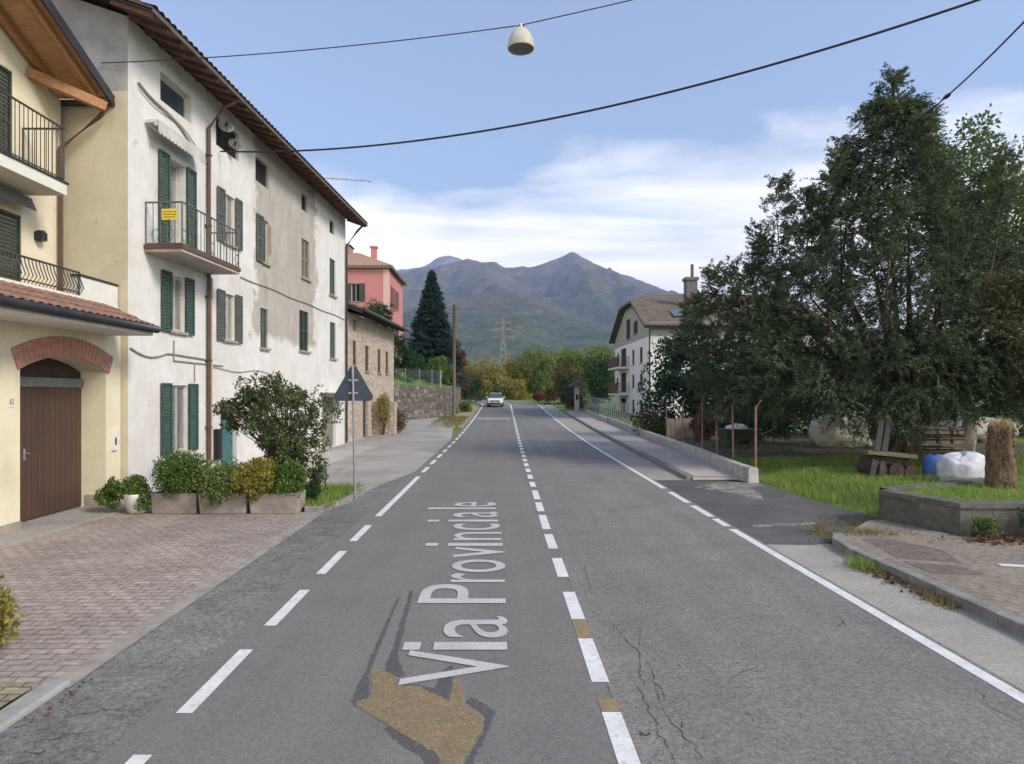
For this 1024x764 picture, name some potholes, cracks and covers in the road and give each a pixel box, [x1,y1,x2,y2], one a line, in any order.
crack [610,621,702,759]
